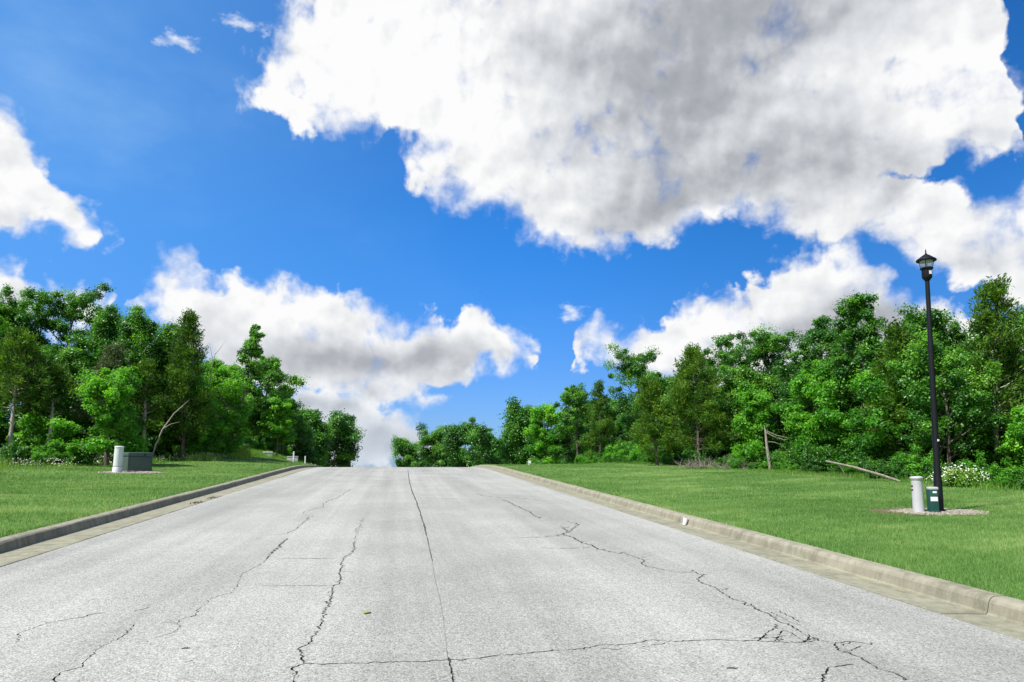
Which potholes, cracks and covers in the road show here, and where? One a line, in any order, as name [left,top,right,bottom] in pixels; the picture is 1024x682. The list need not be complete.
crack [16,489,907,682]
